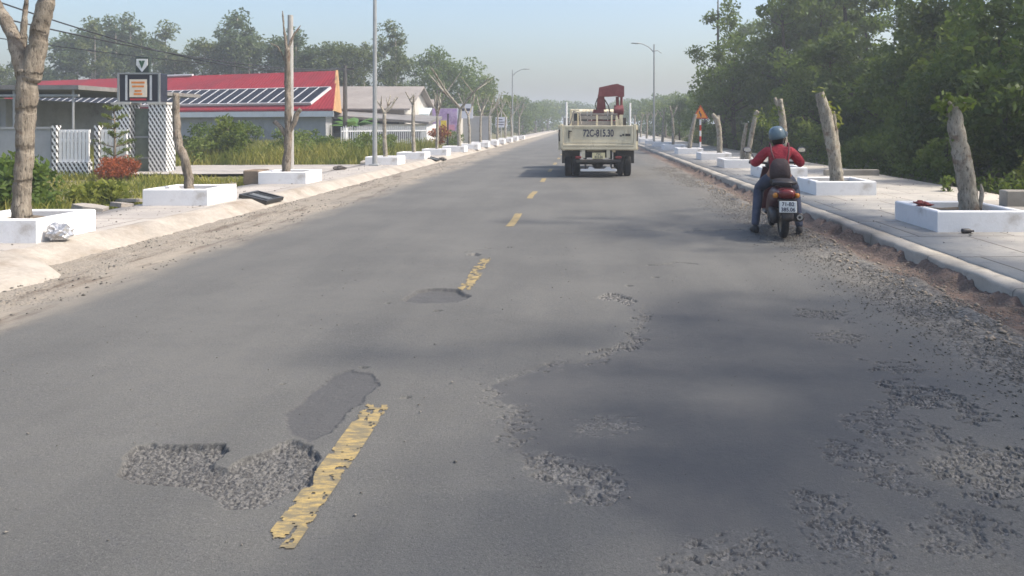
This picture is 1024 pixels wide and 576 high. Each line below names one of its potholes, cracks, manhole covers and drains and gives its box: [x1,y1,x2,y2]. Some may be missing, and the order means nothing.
pothole [583,290,648,307]
pothole [107,436,328,515]
pothole [562,412,653,441]
